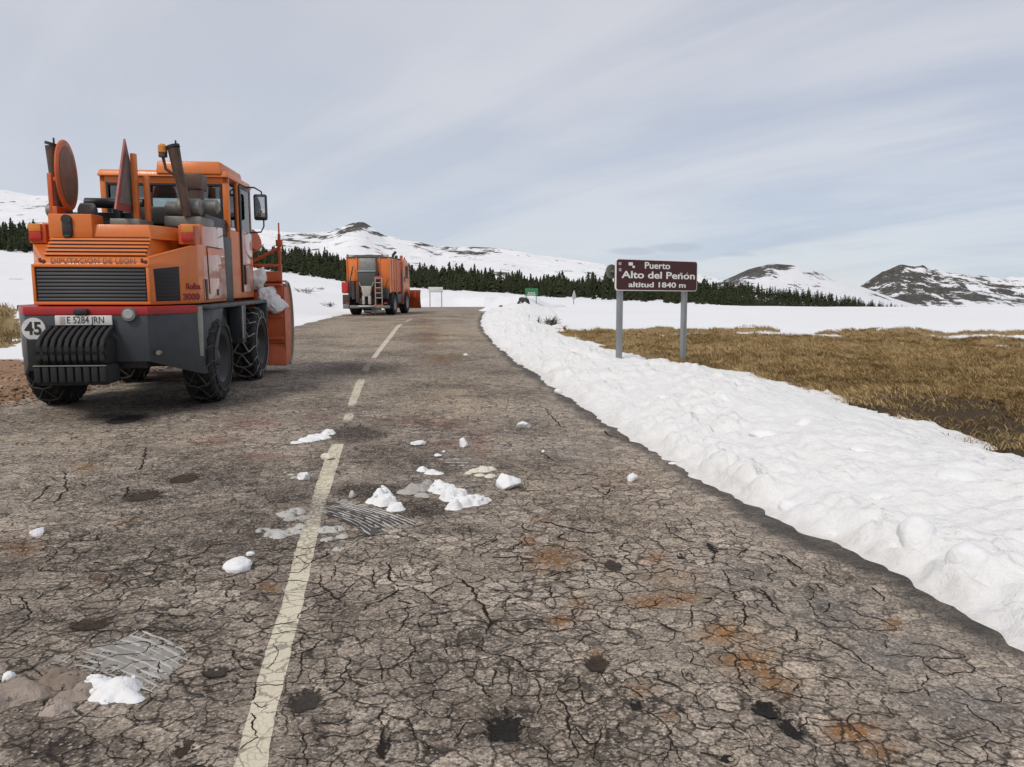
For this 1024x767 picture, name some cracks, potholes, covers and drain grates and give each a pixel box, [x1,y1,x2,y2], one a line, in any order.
pothole [751,700,781,720]
pothole [118,489,164,502]
crack [0,490,1024,767]
pothole [165,473,203,484]
pothole [777,717,805,739]
pothole [481,707,526,743]
crack [31,470,86,504]
pothole [584,655,610,674]
